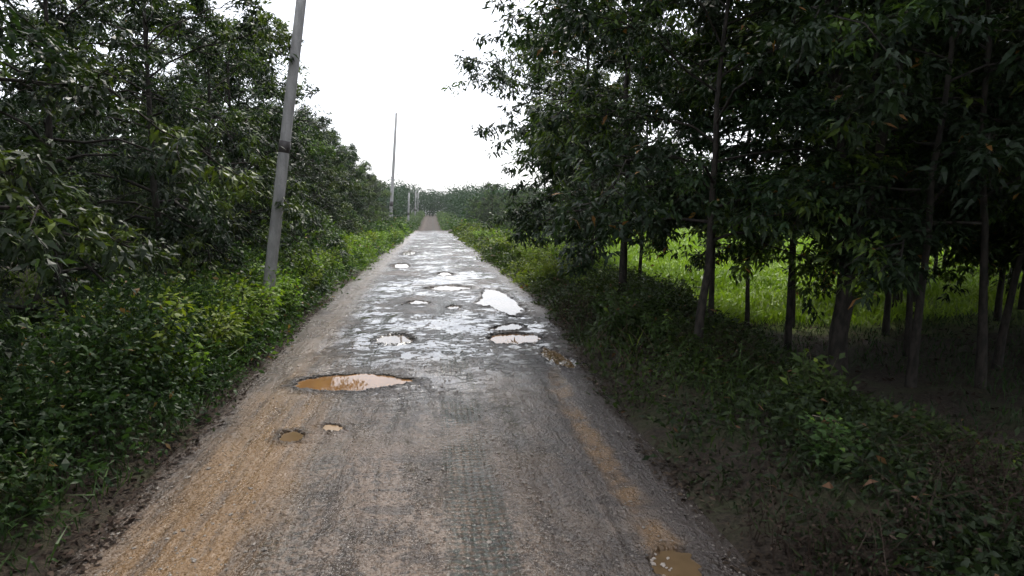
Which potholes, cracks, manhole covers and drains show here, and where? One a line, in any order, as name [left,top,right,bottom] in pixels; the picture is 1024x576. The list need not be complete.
pothole [416,283,486,293]
pothole [266,426,318,448]
pothole [368,332,421,346]
pothole [274,370,429,396]
pothole [467,287,533,317]
pothole [313,421,352,436]
pothole [483,322,528,332]
pothole [626,539,723,576]
pothole [479,331,548,345]
pothole [534,345,583,371]
